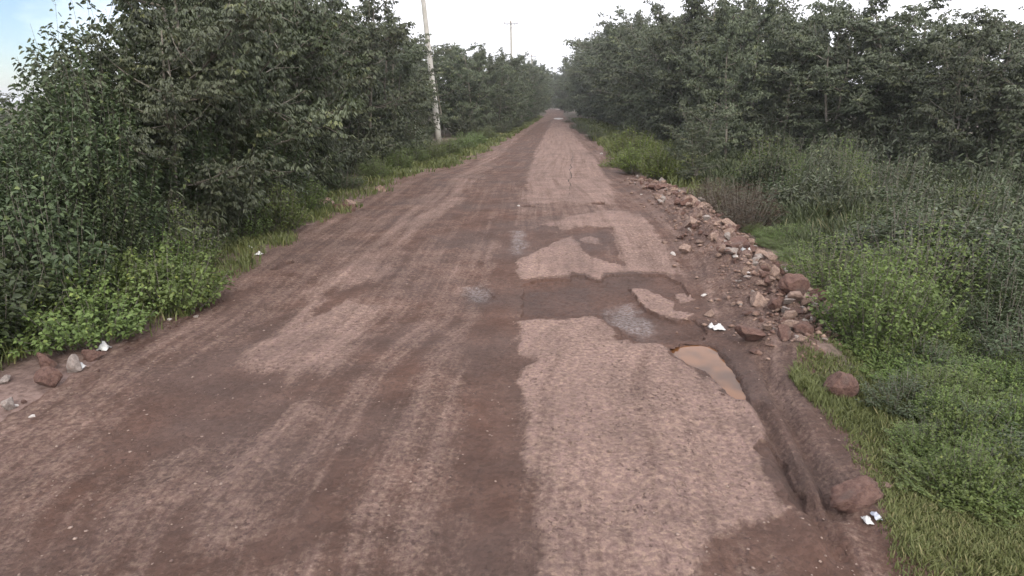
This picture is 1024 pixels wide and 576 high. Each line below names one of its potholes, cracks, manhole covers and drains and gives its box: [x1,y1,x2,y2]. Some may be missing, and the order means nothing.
pothole [660,341,764,412]
pothole [514,270,716,349]
